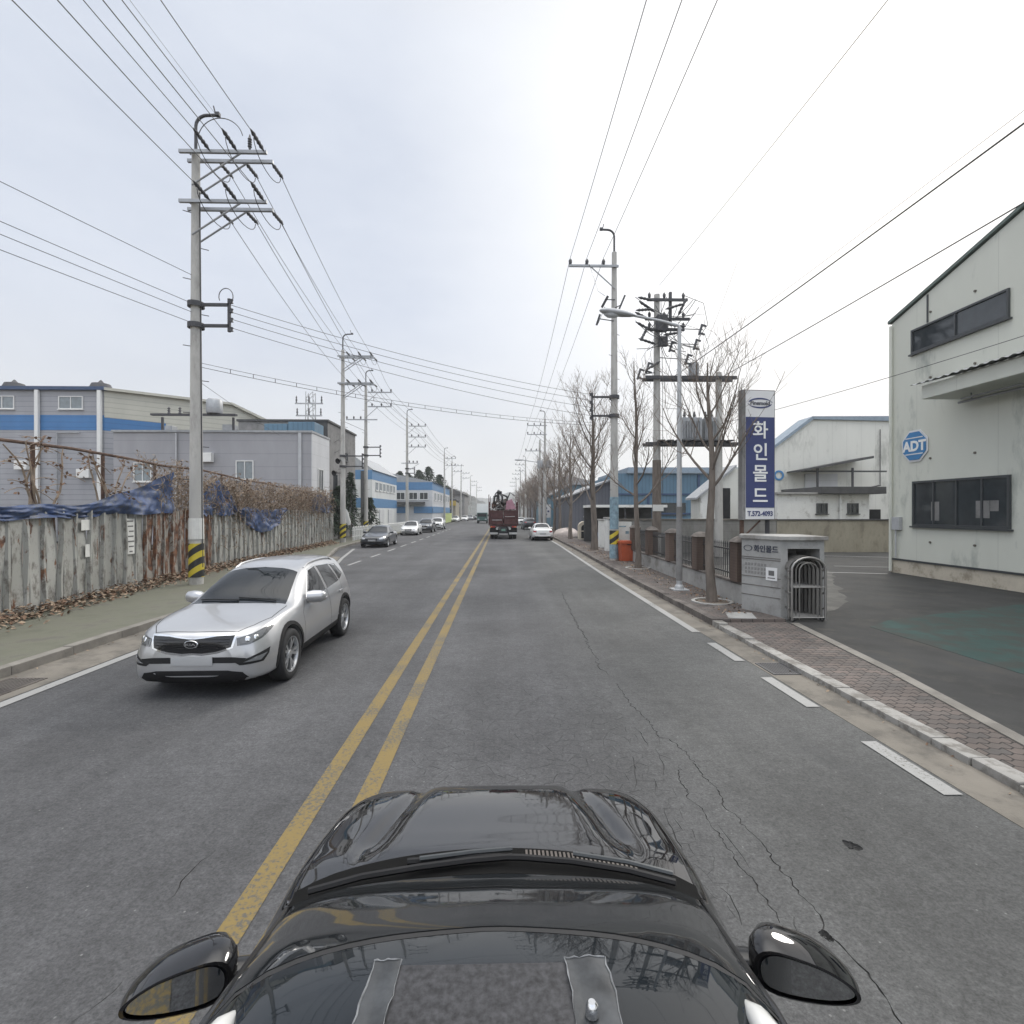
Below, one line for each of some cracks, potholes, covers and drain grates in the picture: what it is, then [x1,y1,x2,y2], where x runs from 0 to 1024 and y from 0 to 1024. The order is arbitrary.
crack [563,597,609,675]
pothole [842,840,863,851]
drain grate [0,678,47,696]
crack [410,673,902,1024]
drain grate [755,663,801,675]
